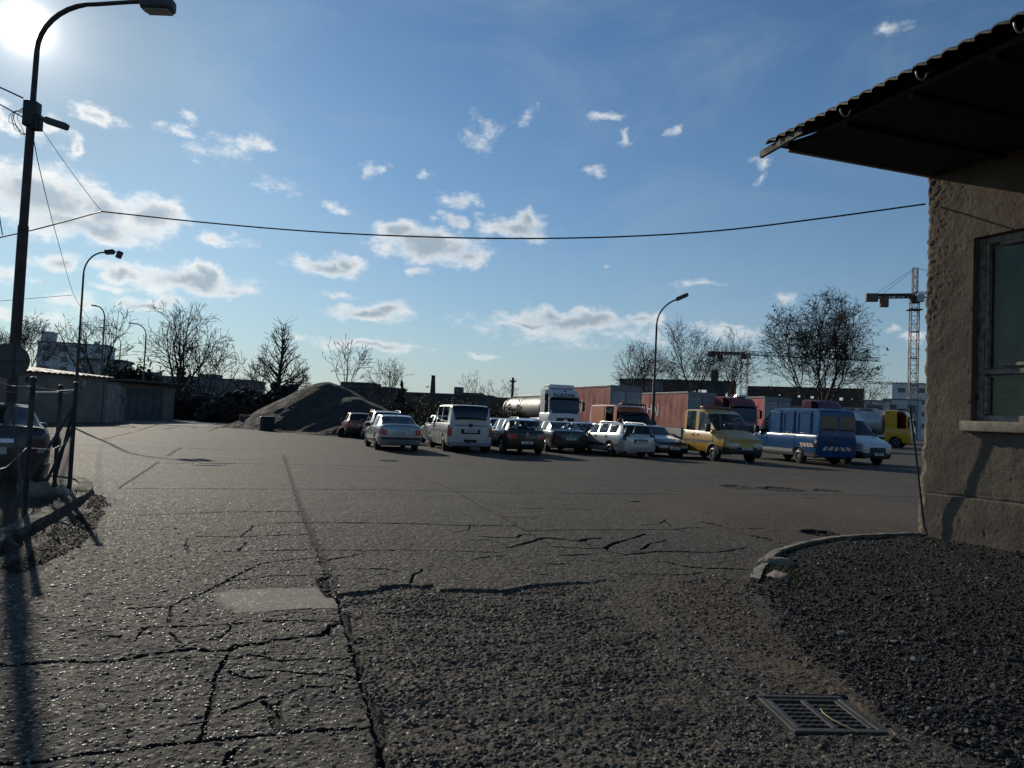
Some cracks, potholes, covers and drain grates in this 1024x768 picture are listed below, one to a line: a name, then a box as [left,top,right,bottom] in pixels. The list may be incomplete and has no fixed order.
crack [467,522,784,576]
pothole [798,529,843,537]
drain grate [756,694,888,736]
crack [0,525,391,767]
